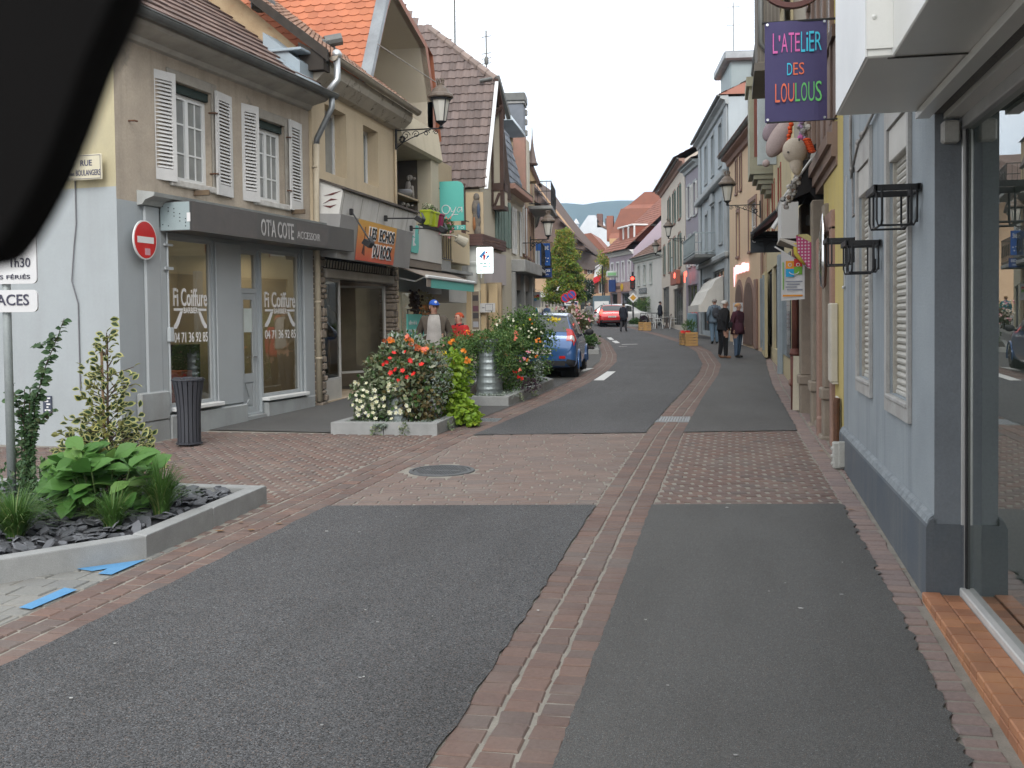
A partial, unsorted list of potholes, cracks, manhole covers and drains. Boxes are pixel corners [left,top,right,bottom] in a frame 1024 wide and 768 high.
manhole cover [409,465,475,477]
